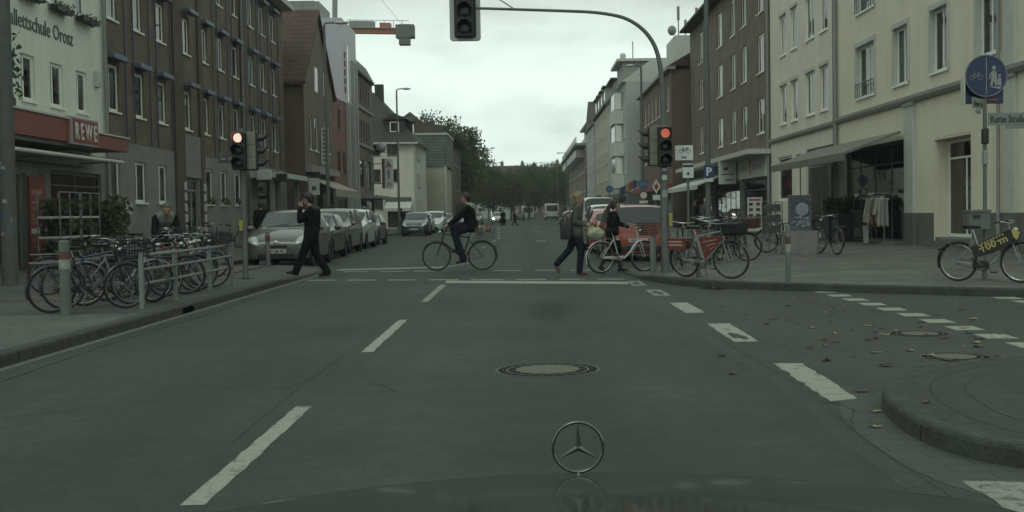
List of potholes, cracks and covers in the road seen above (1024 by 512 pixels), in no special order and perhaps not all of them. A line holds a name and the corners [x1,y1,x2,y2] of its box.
manhole cover [918,352,991,361]
manhole cover [493,362,602,377]
